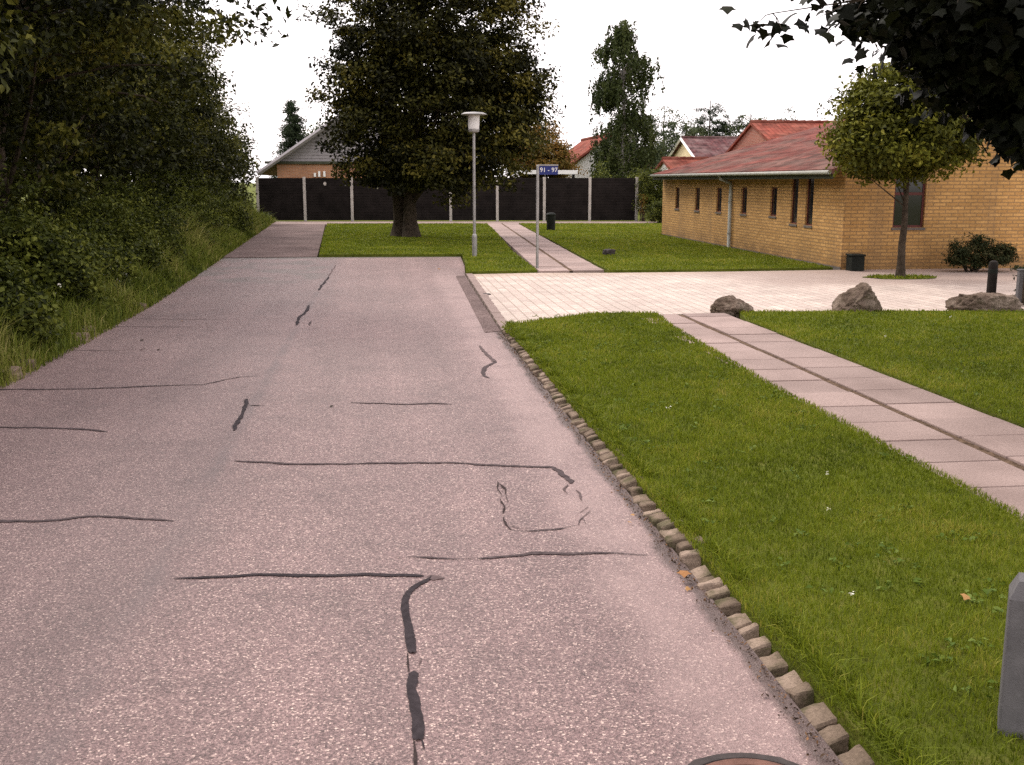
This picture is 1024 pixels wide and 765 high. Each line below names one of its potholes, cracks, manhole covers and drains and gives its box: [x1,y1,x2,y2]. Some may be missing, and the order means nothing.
manhole cover [688,753,799,765]
crack [394,551,645,559]
crack [0,376,248,390]
crack [497,481,590,531]
